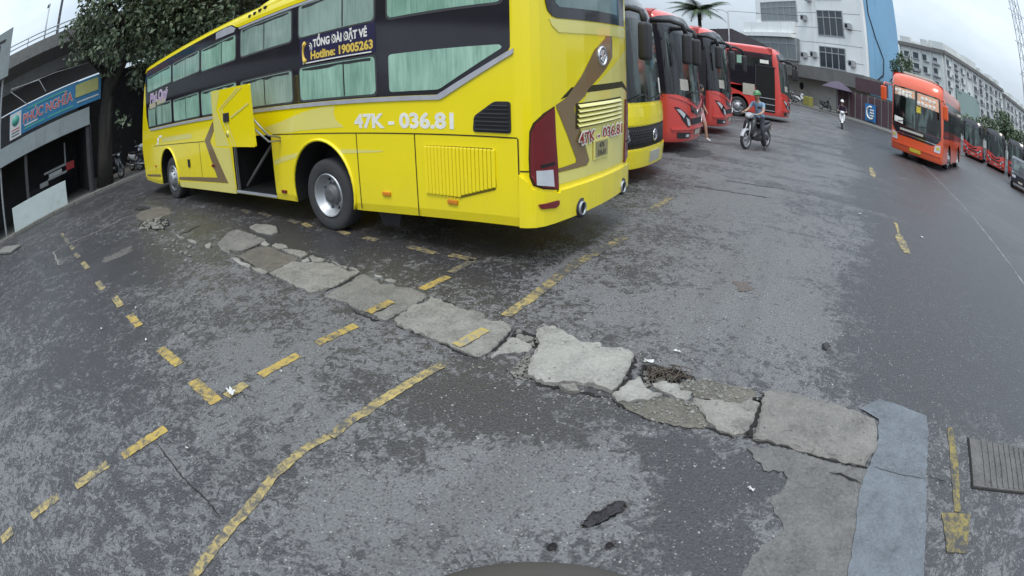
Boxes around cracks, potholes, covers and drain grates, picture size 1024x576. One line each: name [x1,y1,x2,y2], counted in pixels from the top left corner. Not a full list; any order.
pothole [581,501,626,527]
crack [705,392,949,483]
pothole [640,364,696,388]
crack [158,445,220,517]
